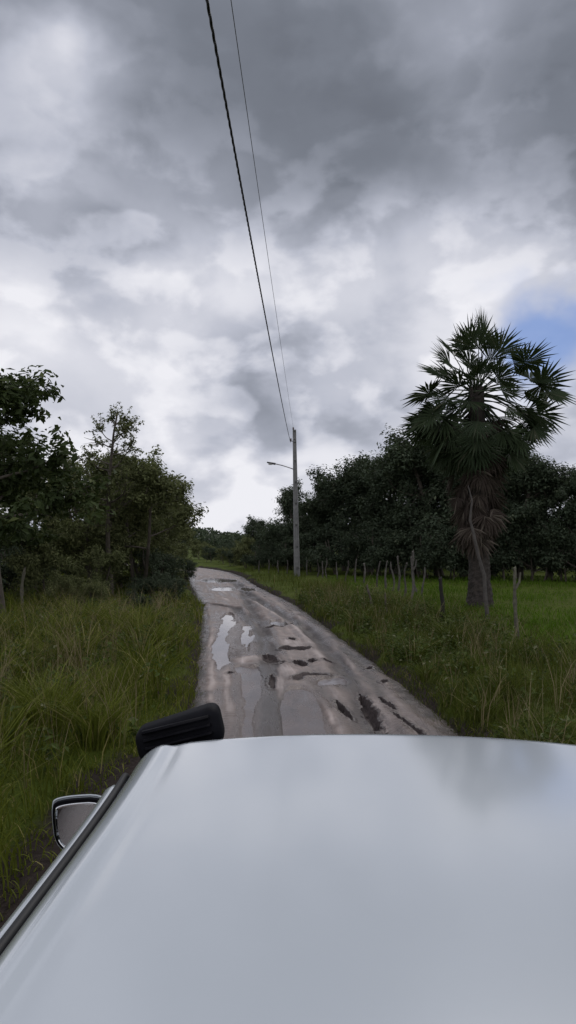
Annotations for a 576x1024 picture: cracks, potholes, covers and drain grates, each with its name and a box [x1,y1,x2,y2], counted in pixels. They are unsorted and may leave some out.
pothole [258,653,283,665]
pothole [264,673,280,690]
pothole [354,692,389,734]
pothole [288,671,333,682]
pothole [385,710,430,735]
pothole [329,699,359,724]
